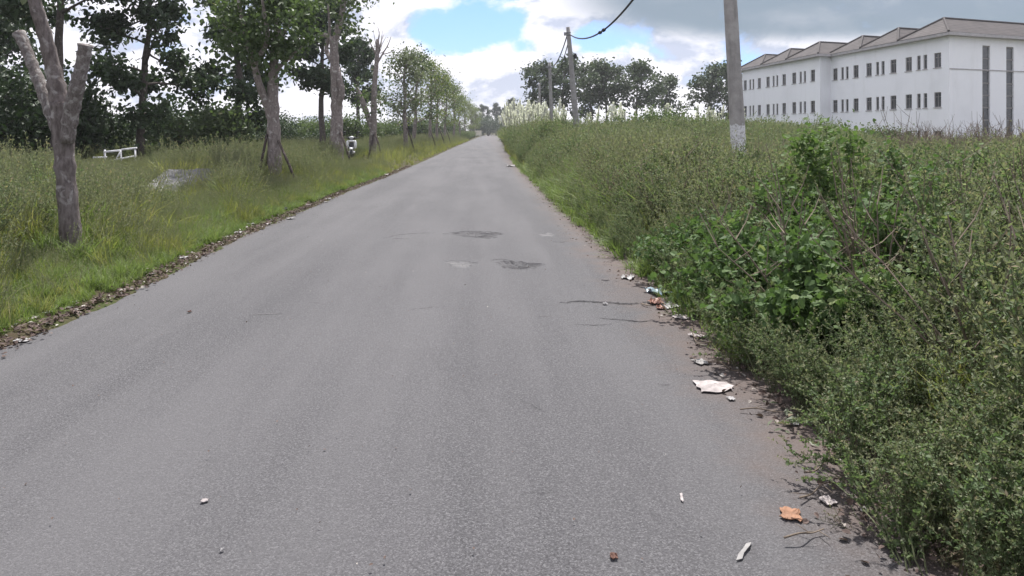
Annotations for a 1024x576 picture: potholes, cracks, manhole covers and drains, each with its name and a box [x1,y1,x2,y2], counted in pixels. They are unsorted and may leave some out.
crack [560,300,655,325]
pothole [494,261,546,270]
